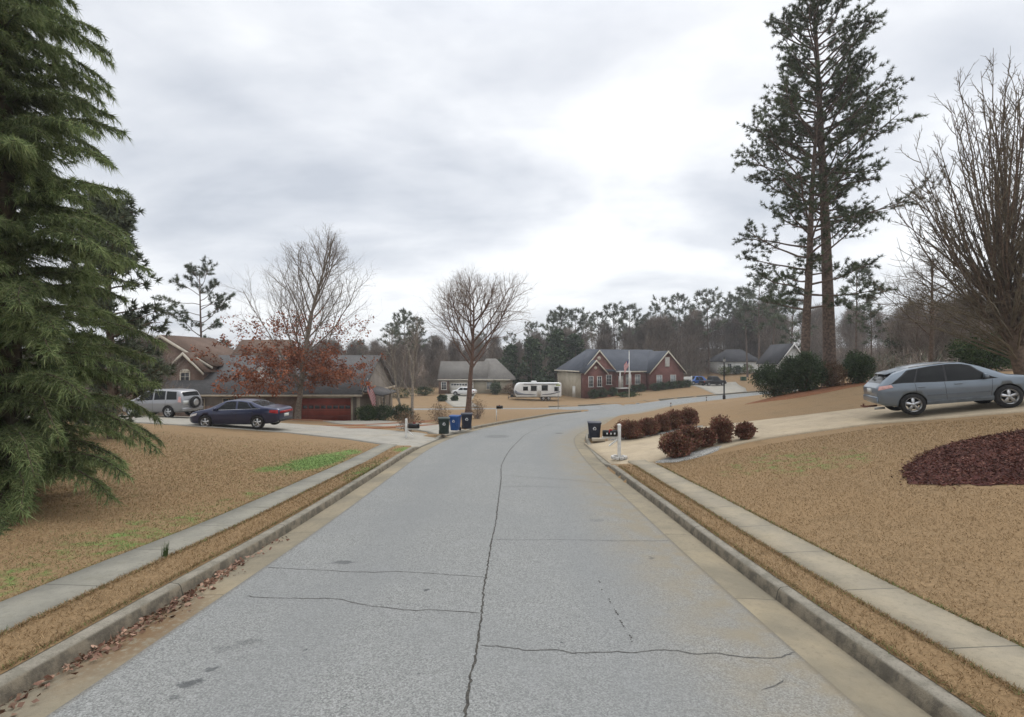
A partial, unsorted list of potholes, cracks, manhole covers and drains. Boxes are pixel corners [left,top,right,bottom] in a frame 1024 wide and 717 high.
crack [249,417,793,717]
